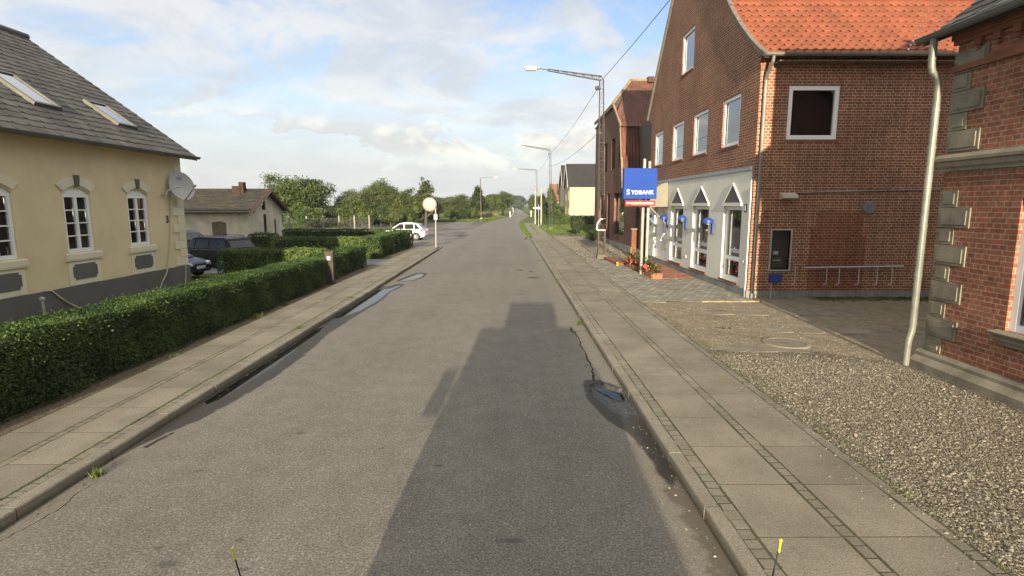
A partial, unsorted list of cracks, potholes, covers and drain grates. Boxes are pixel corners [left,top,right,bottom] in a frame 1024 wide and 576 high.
pothole [589,382,638,418]
crack [570,327,595,381]
manhole cover [762,337,811,349]
crack [0,481,98,541]
